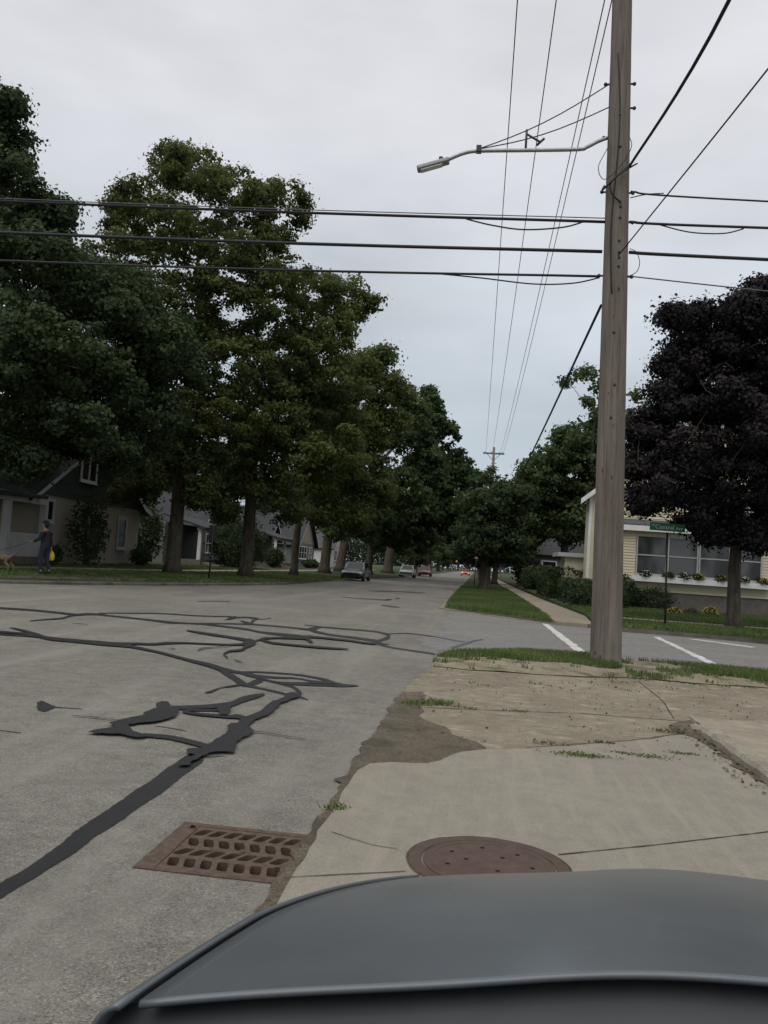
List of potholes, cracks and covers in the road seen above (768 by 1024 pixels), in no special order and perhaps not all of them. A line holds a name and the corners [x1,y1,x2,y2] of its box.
drain grate [132,821,308,884]
manhole cover [409,837,570,876]
